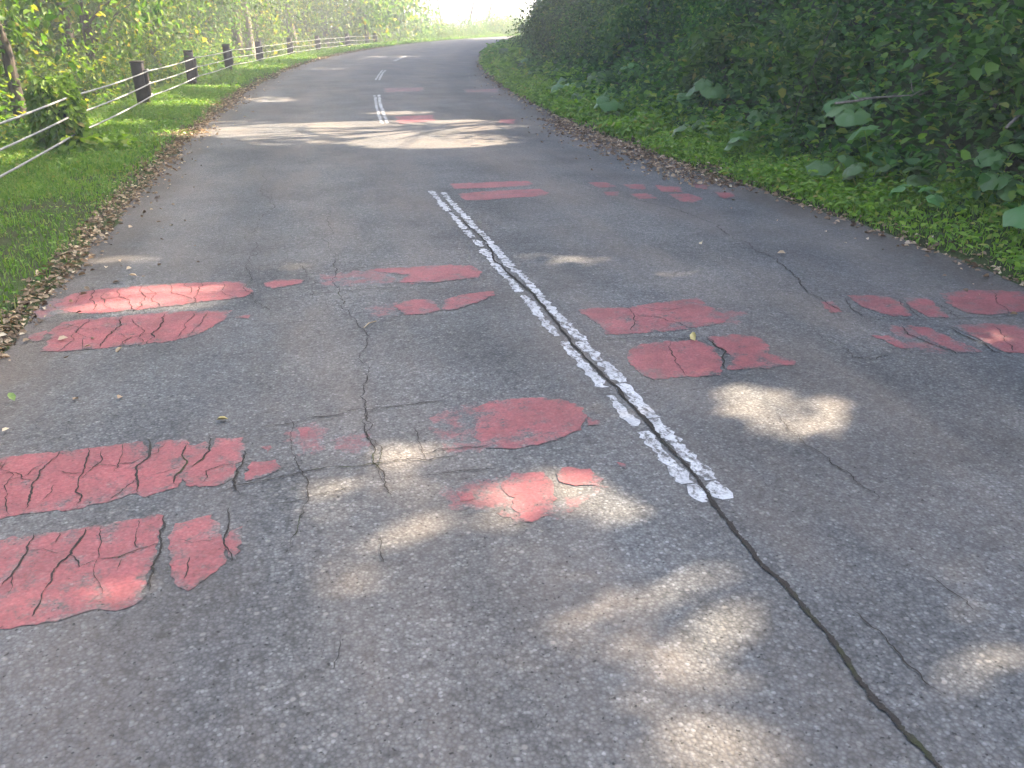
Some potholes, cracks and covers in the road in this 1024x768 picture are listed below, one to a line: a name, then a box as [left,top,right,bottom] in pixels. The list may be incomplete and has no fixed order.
crack [780,417,880,499]
crack [846,605,943,695]
crack [209,210,494,669]
